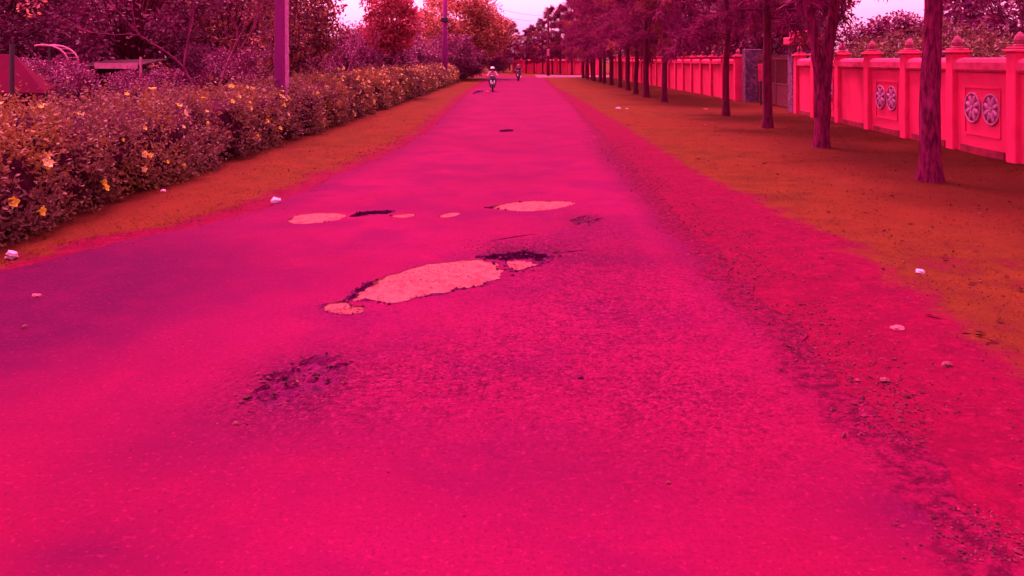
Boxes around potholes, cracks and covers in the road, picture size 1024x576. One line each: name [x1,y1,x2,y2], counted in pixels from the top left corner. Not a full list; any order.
pothole [349,209,394,217]
pothole [570,214,603,226]
pothole [471,249,562,276]
pothole [236,352,355,414]
